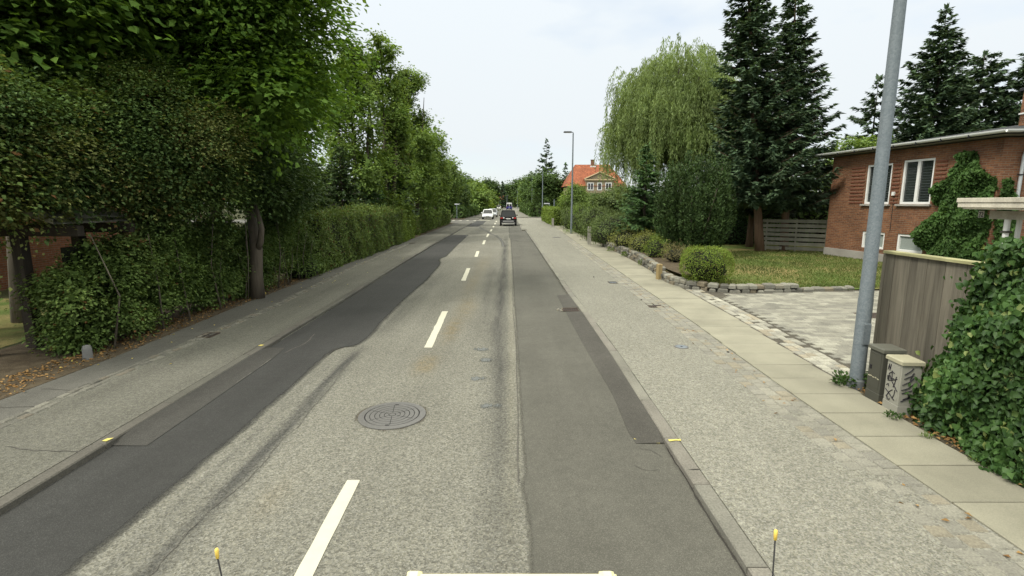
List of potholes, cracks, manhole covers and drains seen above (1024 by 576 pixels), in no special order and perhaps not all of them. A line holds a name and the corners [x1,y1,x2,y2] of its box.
manhole cover [358,402,426,430]
